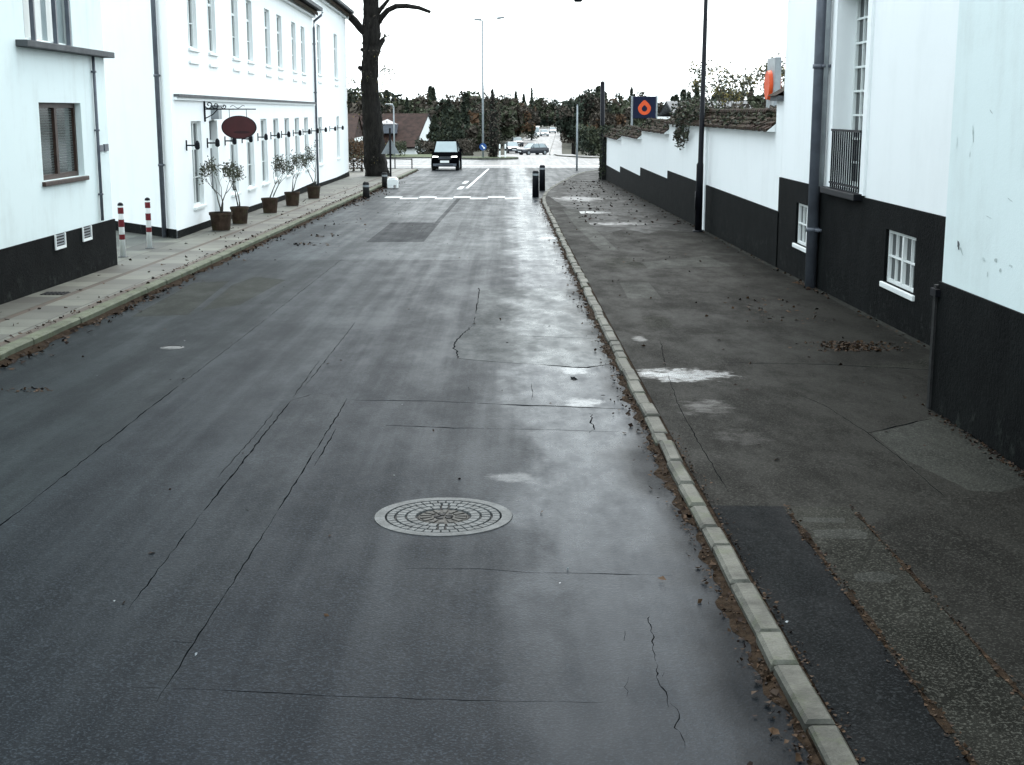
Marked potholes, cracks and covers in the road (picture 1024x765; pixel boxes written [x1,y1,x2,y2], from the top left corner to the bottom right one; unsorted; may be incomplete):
crack [624,617,685,742]
manhole cover [374,497,513,537]
crack [371,383,616,433]
crack [453,289,609,368]
